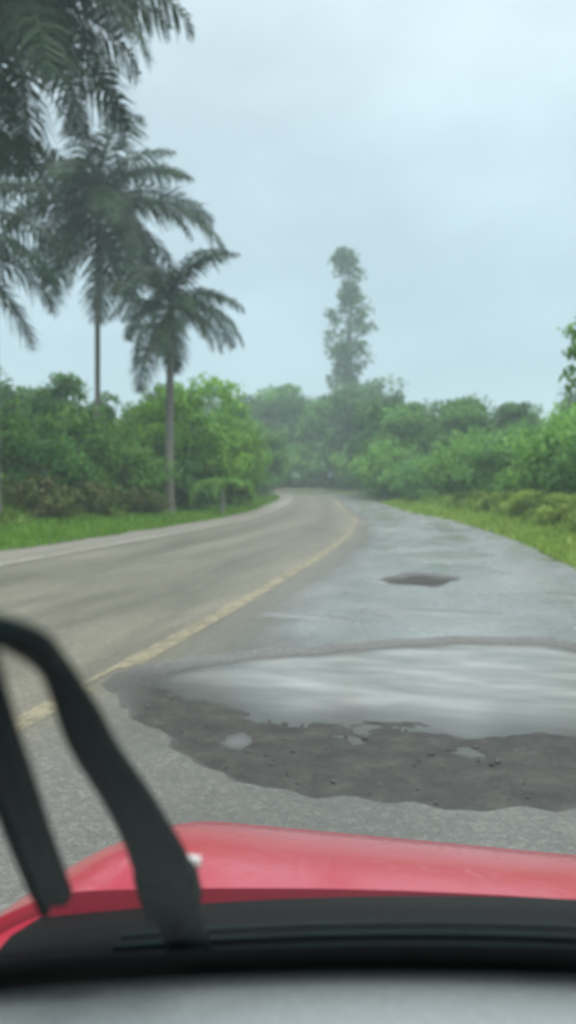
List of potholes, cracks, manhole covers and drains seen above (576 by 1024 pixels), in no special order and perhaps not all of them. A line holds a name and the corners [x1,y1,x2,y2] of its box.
pothole [101,636,576,812]
pothole [379,571,461,587]
